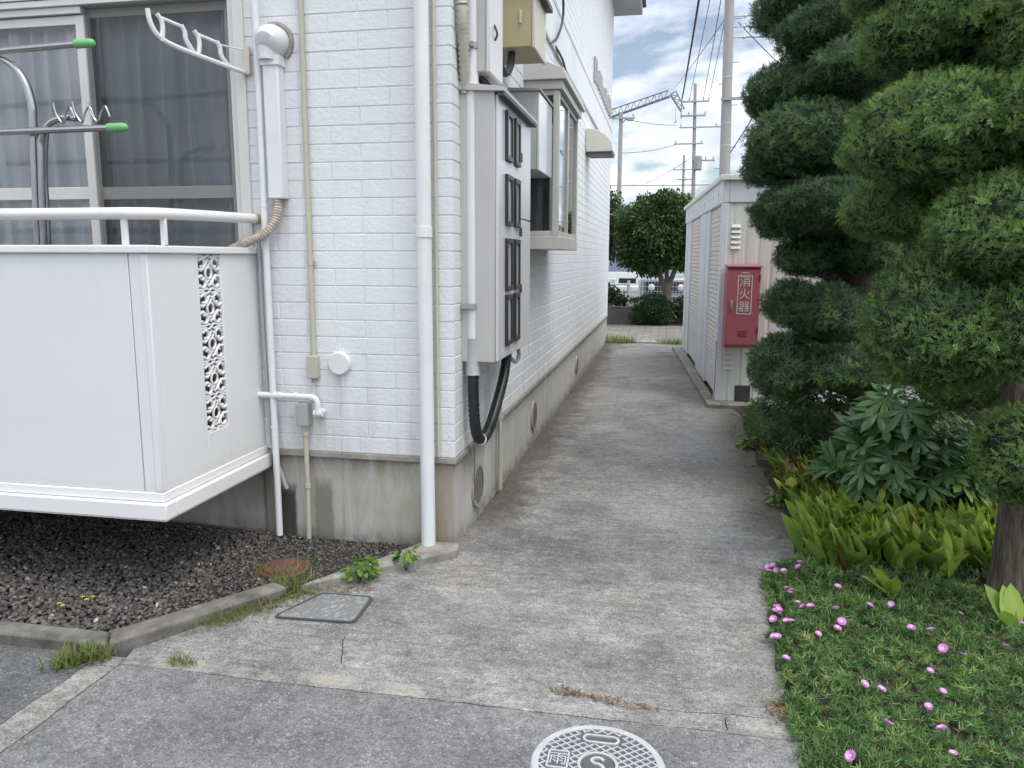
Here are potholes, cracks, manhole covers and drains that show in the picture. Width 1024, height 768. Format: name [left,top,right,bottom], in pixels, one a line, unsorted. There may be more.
manhole cover [530,725,666,768]
